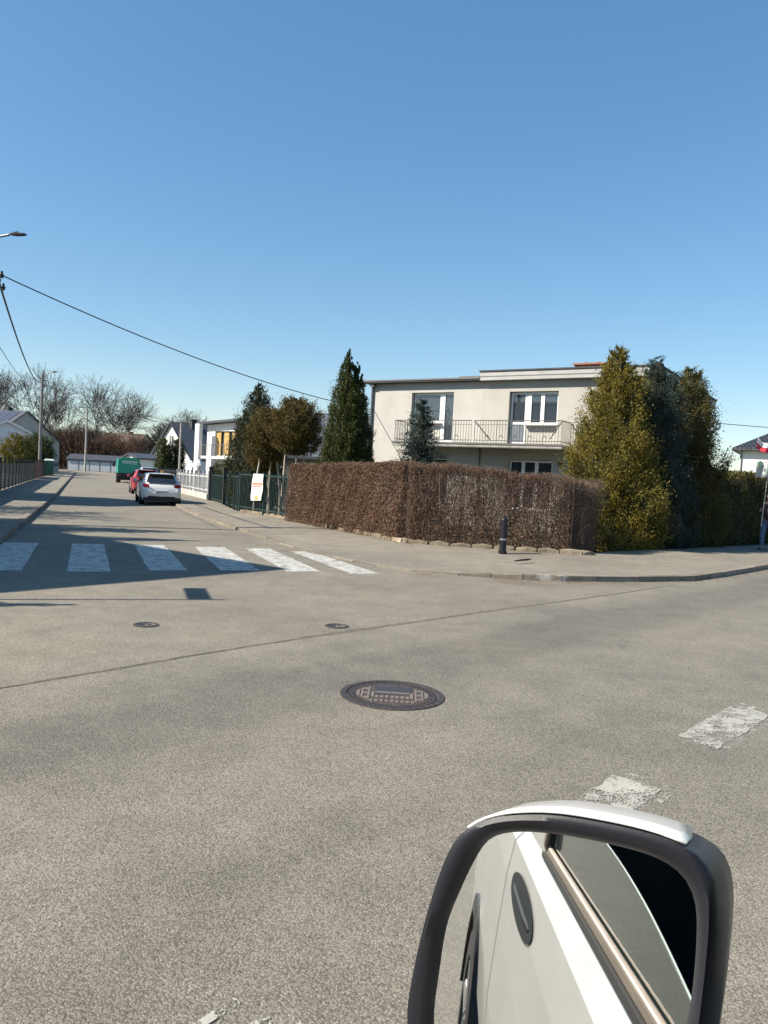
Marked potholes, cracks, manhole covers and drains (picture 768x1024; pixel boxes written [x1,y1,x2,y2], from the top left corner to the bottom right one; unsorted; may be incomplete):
manhole cover [340,680,444,711]
